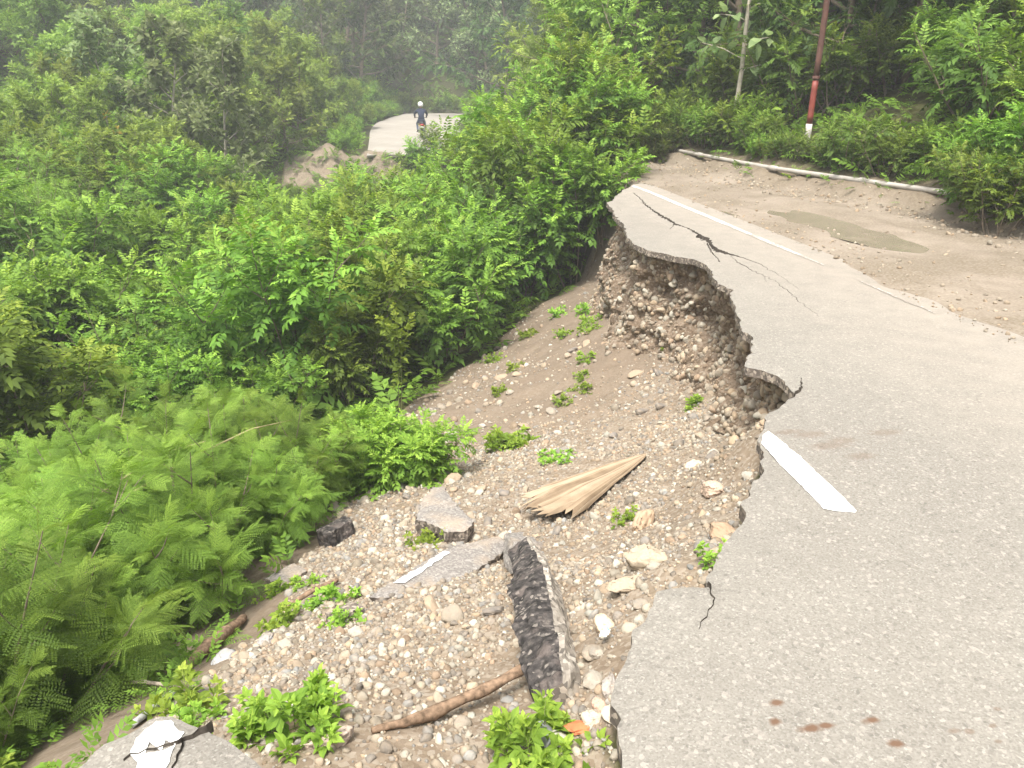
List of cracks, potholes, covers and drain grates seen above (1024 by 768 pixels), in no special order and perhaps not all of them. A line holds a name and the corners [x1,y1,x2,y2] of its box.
crack [699,581,715,629]
crack [634,193,818,316]
